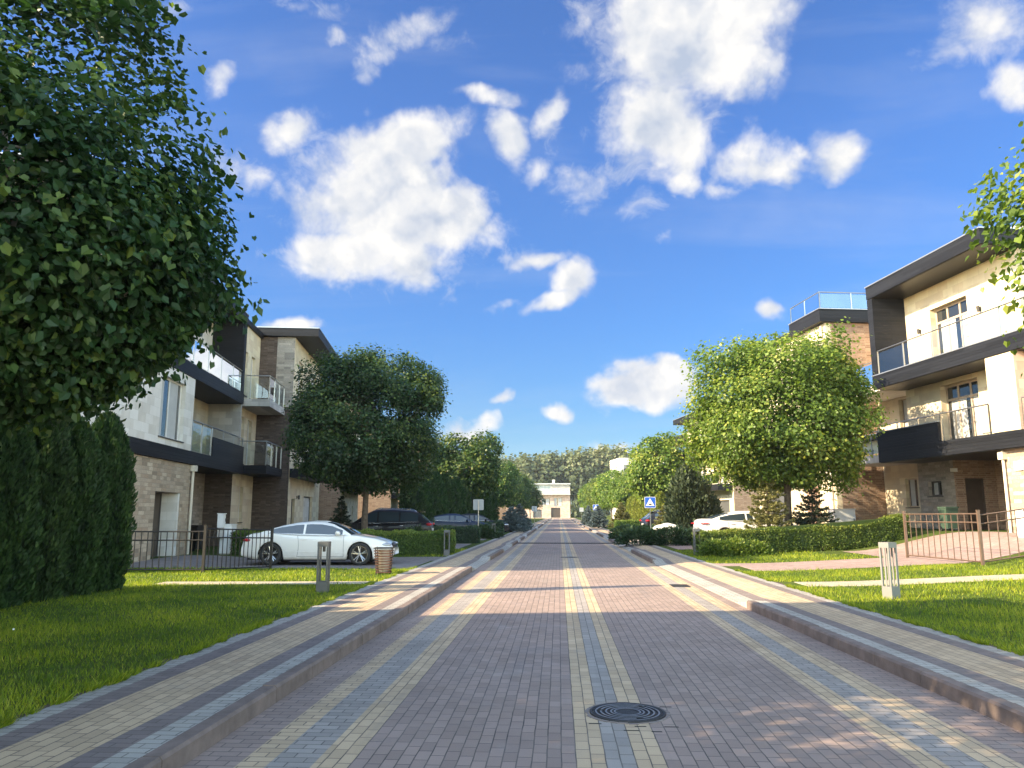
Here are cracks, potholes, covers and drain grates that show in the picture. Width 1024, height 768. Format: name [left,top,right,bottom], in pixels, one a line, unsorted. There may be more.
manhole cover [585,702,673,732]
